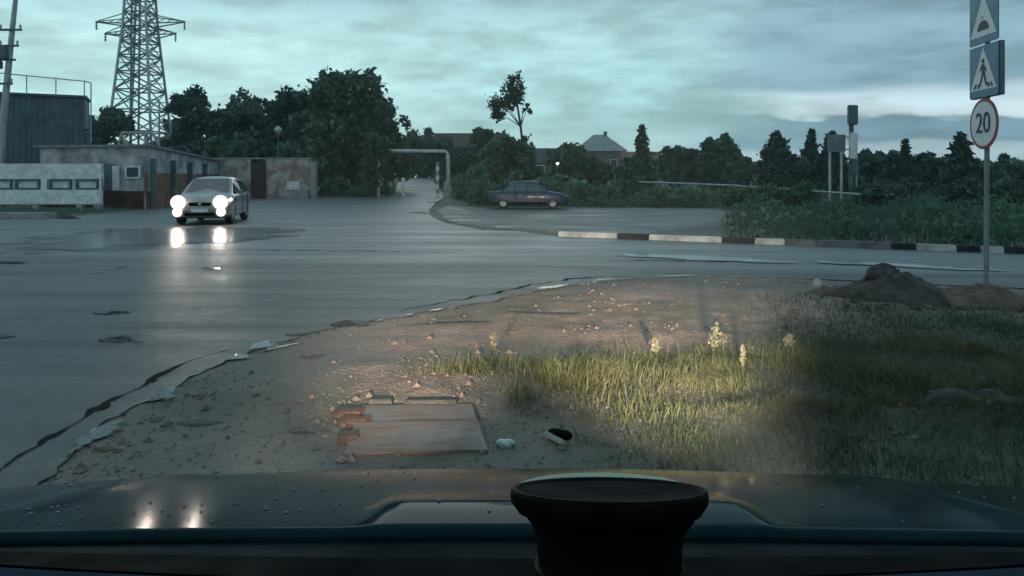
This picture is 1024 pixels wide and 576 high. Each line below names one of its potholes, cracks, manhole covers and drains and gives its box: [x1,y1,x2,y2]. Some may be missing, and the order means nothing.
crack [0,347,234,471]
